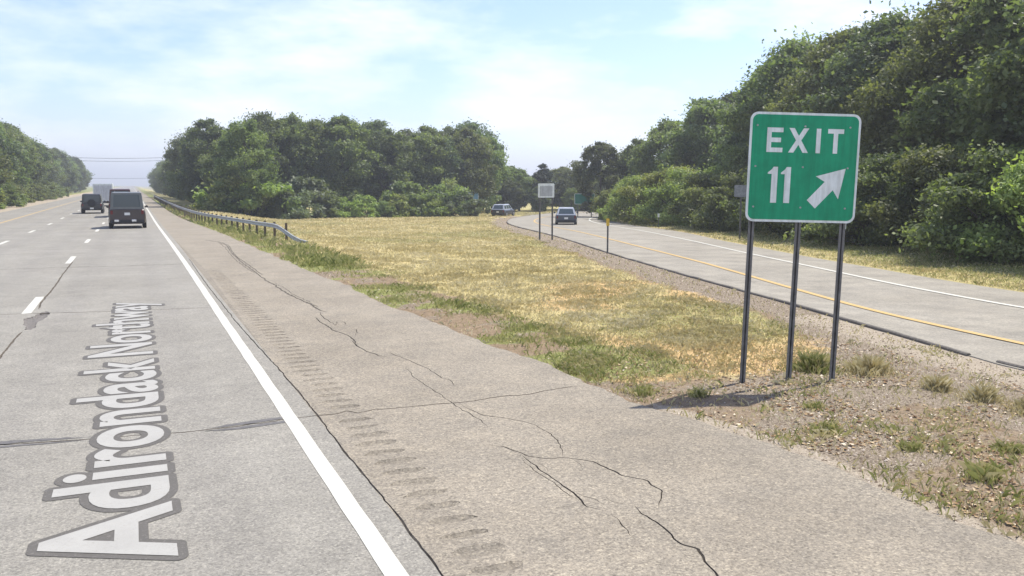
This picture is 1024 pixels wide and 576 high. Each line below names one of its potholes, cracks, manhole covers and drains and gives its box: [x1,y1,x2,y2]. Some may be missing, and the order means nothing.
crack [0,240,567,448]
crack [462,405,719,576]
